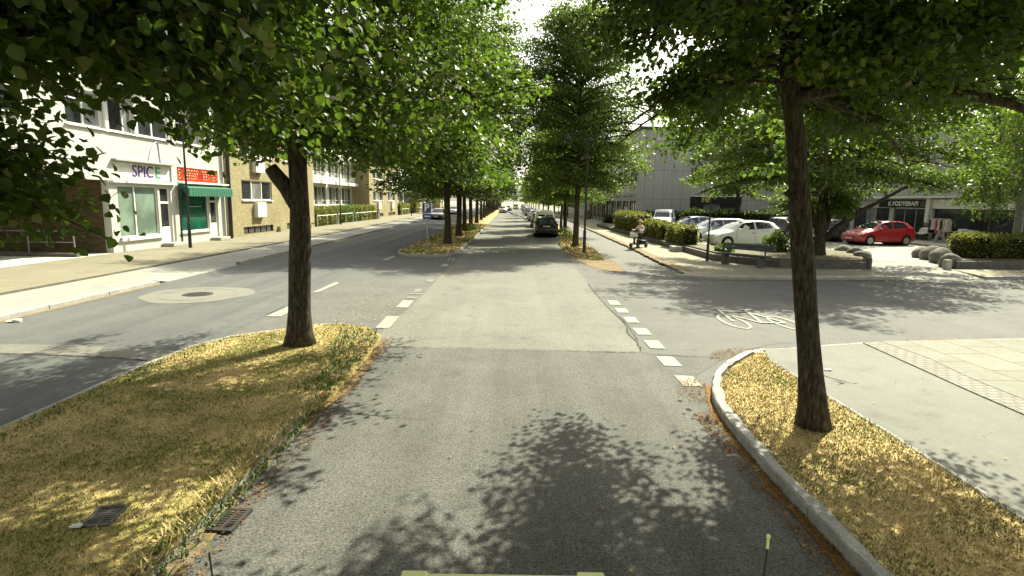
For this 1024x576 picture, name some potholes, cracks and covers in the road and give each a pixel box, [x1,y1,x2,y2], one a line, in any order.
drain grate [206,507,253,534]
manhole cover [138,287,255,304]
drain grate [80,504,131,528]
